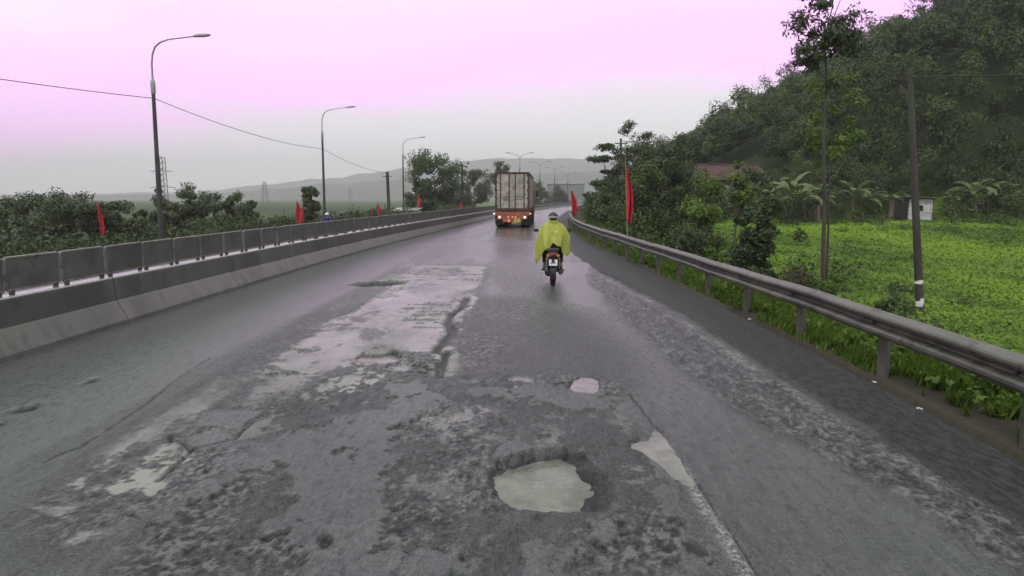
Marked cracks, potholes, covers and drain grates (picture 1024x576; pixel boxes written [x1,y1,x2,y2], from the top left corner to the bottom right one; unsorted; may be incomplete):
crack [43,358,209,463]
pothole [354,351,404,364]
pothole [488,446,617,513]
crack [428,296,472,379]
pothole [568,377,602,394]
pothole [627,429,698,488]
